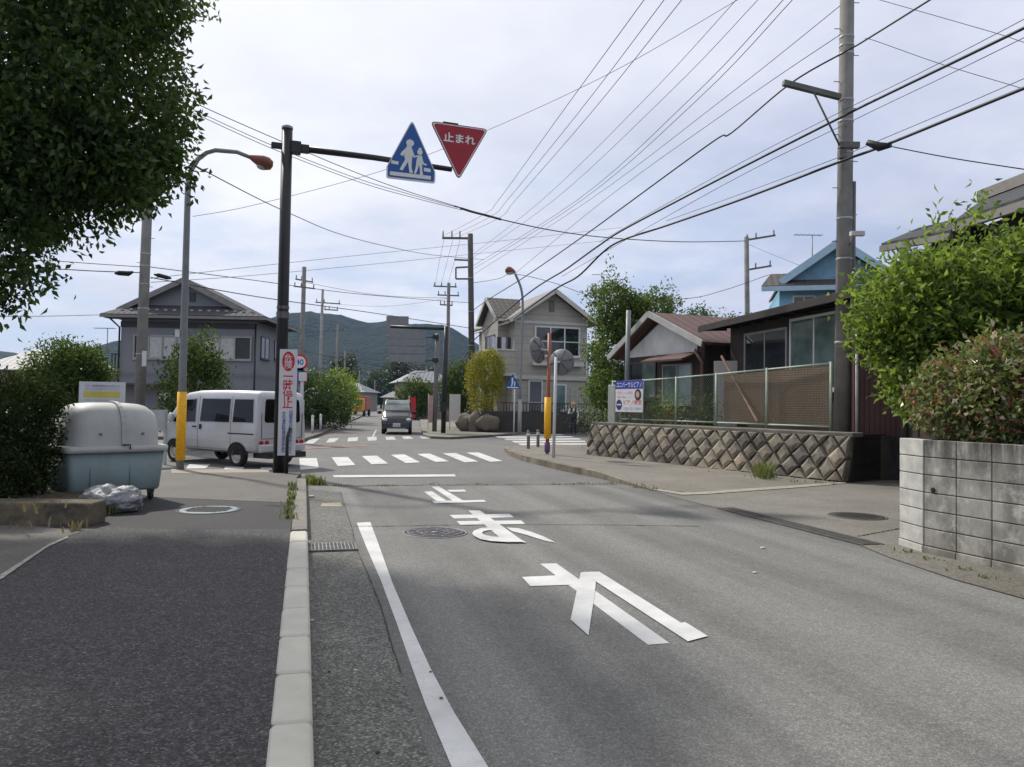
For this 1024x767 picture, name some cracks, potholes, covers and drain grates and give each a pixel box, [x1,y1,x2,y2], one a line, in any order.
manhole cover [402,527,468,539]
drain grate [308,541,358,552]
manhole cover [175,505,242,514]
manhole cover [827,512,889,521]
